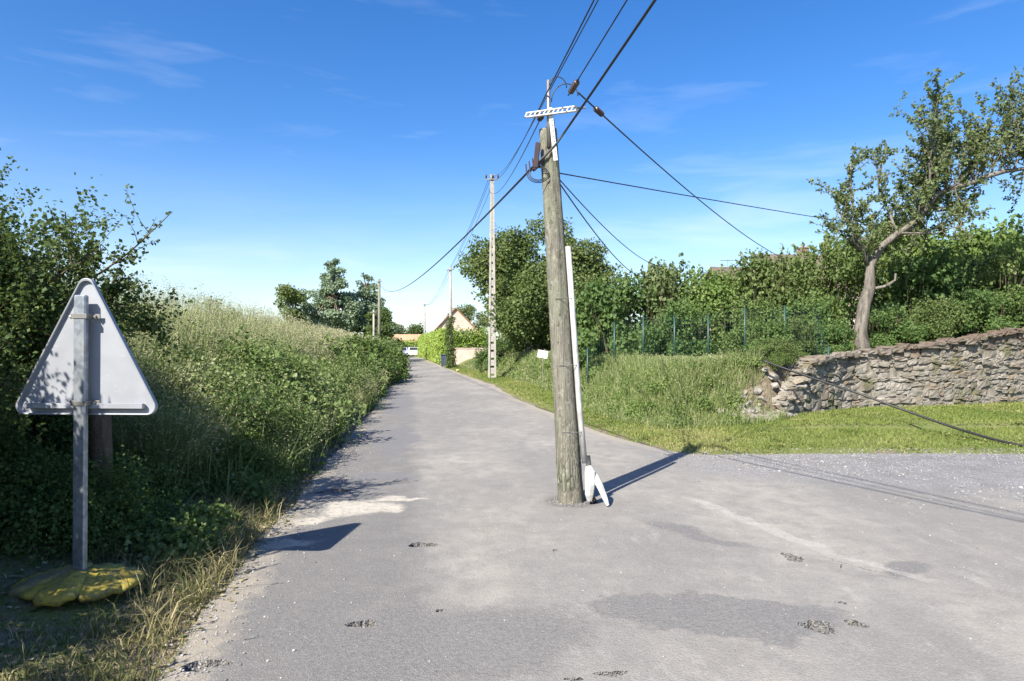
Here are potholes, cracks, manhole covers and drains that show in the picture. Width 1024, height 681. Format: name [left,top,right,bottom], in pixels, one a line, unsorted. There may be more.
pothole [344,619,377,628]
pothole [844,619,870,628]
pothole [798,619,838,635]
pothole [780,552,804,562]
